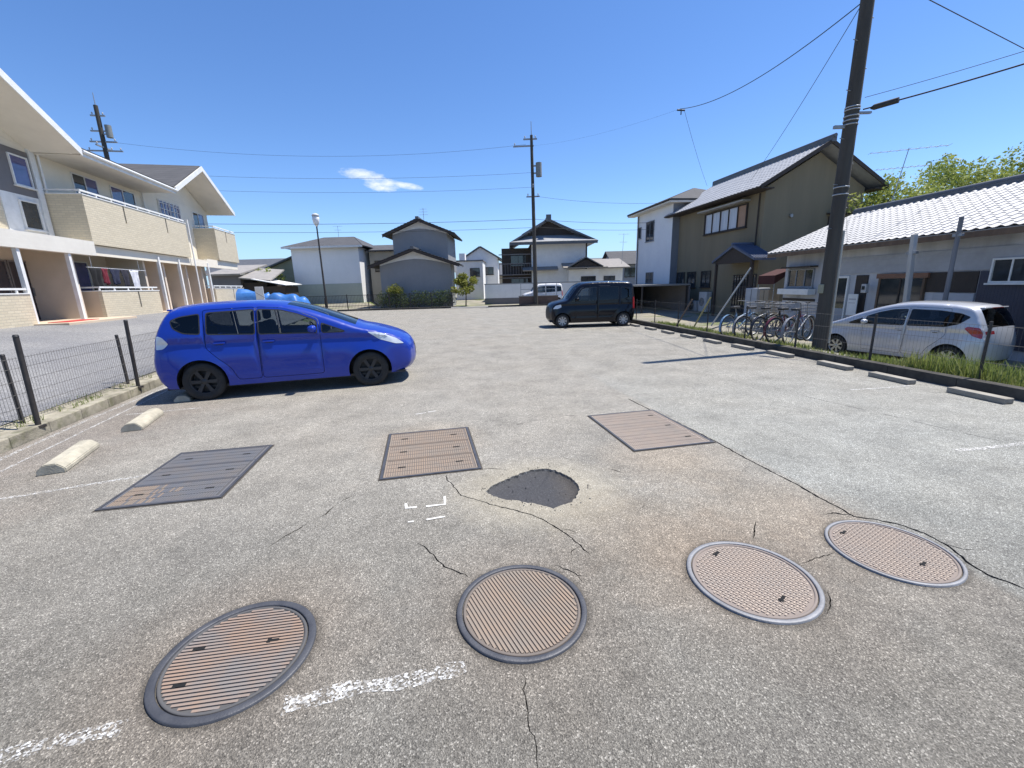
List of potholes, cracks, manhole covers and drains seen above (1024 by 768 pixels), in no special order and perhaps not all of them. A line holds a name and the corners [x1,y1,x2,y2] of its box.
crack [446,475,591,581]
crack [269,496,351,547]
manhole cover [457,565,587,664]
crack [629,399,1024,589]
pothole [481,463,591,511]
manhole cover [824,520,968,588]
crack [418,543,470,578]
manhole cover [91,445,274,513]
manhole cover [378,427,483,481]
manhole cover [144,601,317,728]
crack [522,674,538,768]
manhole cover [686,541,825,625]
